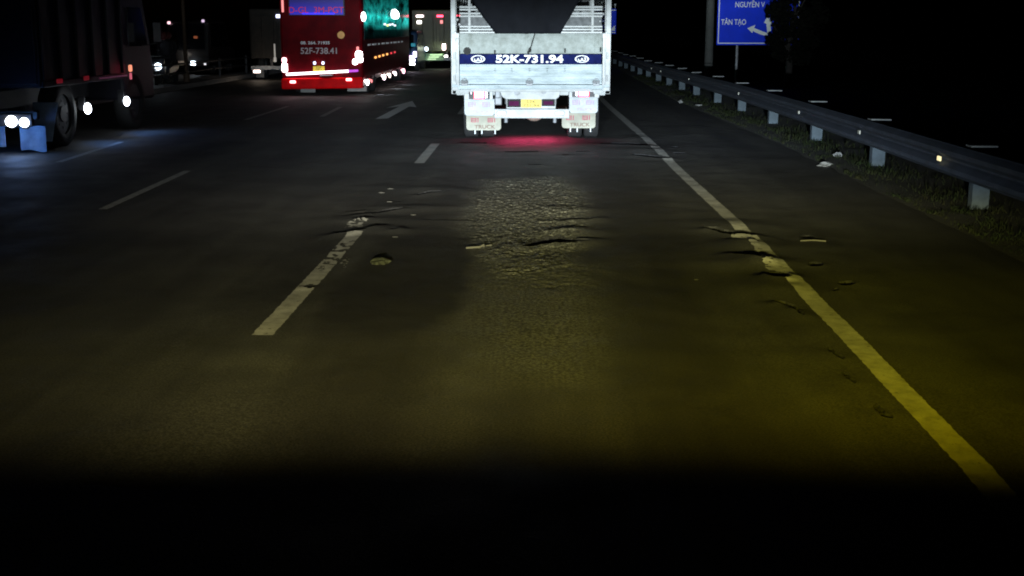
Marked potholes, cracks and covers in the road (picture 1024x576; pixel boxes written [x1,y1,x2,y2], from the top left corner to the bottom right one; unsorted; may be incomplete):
crack [774,300,805,315]
crack [551,217,599,230]
crack [352,190,442,230]
